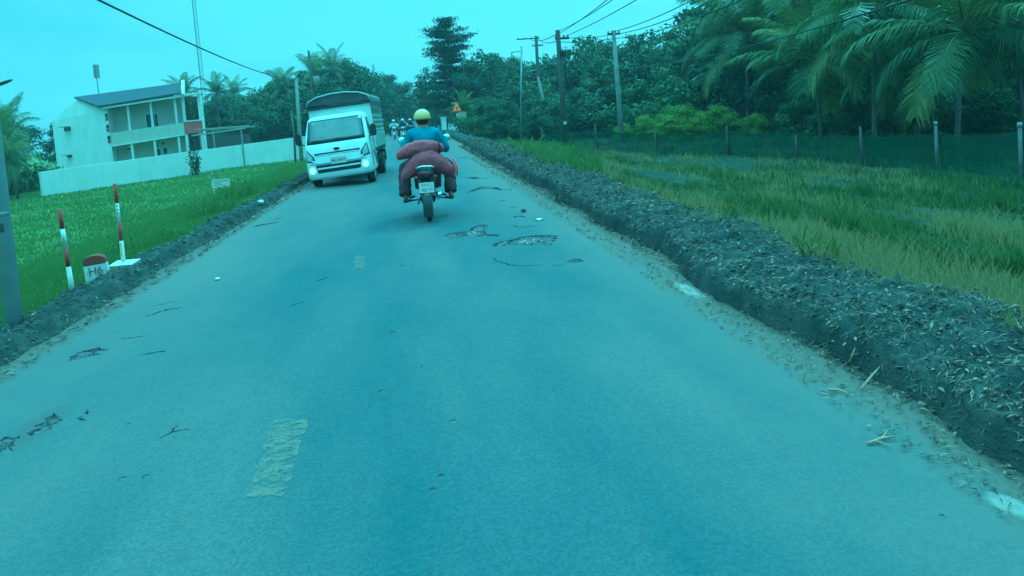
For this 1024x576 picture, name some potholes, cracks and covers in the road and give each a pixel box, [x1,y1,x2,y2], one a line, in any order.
pothole [27,412,63,436]
pothole [492,235,558,247]
pothole [444,225,499,240]
pothole [0,436,20,455]
pothole [69,346,108,361]
